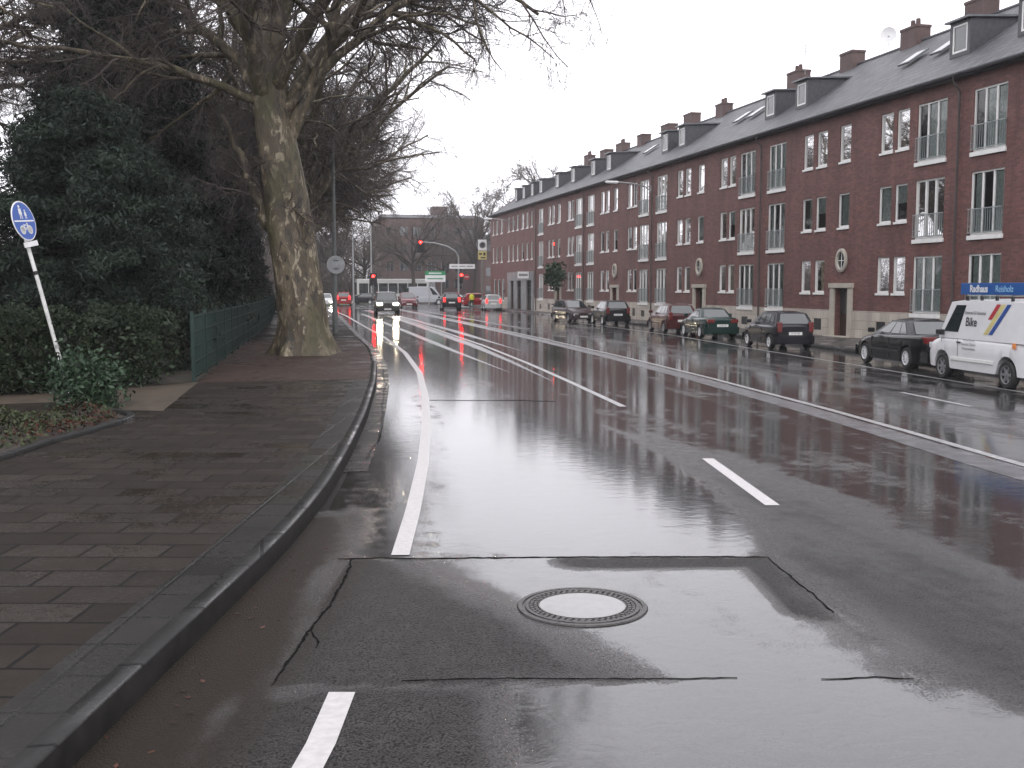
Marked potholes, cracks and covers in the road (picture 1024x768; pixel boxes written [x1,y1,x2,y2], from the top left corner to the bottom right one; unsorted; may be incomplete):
crack [272,559,353,685]
manhole cover [517,587,648,627]
